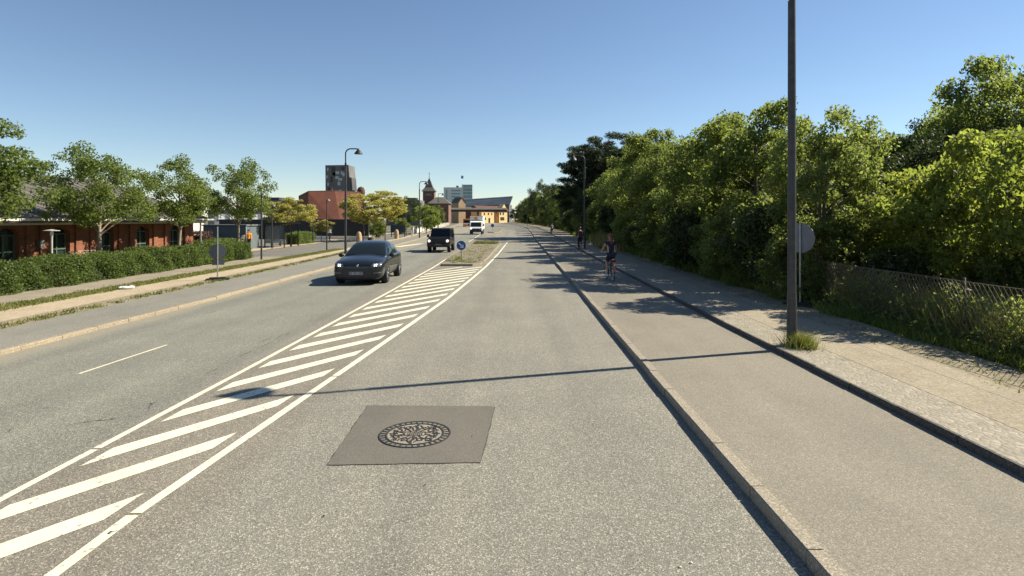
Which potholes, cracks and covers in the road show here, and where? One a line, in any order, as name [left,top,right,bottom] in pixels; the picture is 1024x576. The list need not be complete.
manhole cover [378,421,451,448]
